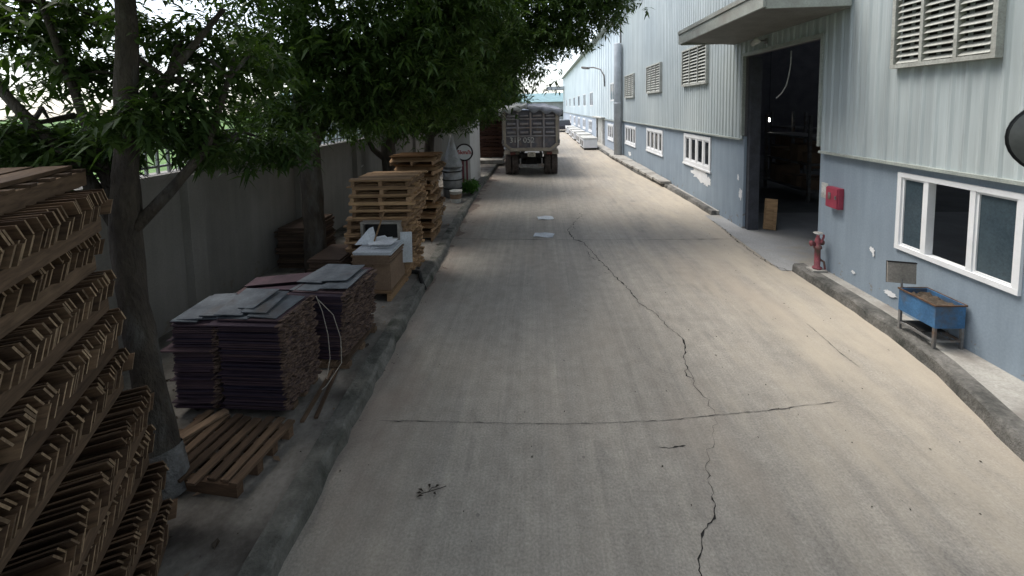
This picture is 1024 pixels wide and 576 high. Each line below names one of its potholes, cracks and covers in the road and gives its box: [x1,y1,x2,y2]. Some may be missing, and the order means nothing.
crack [382,401,836,424]
crack [567,213,718,576]
